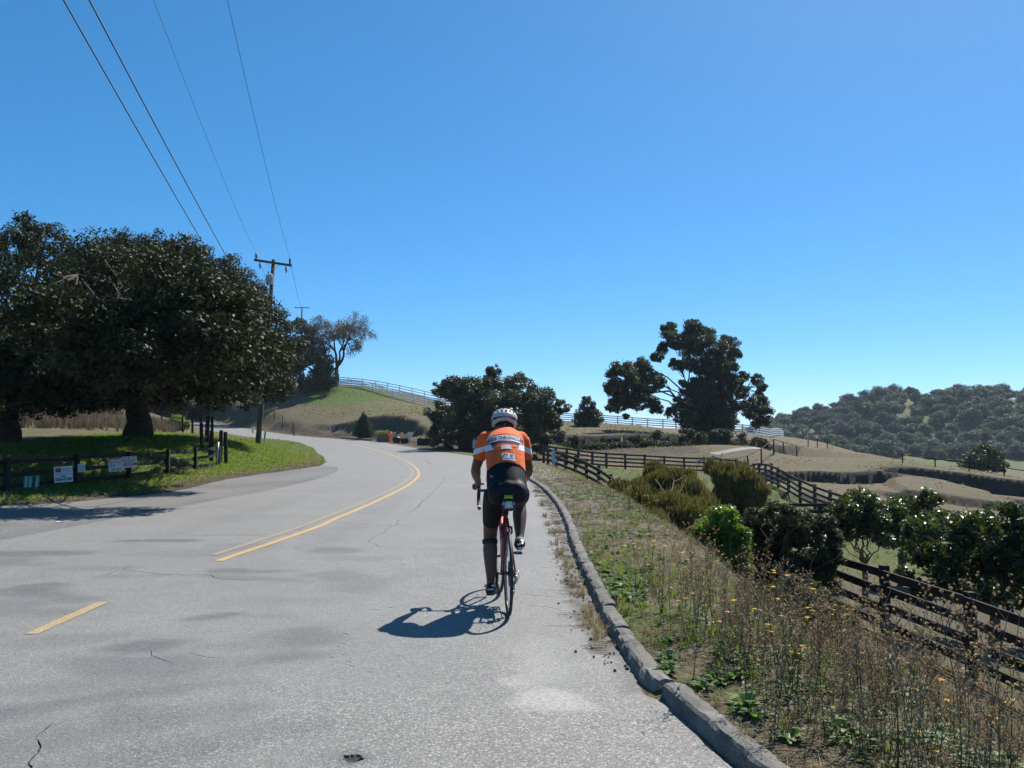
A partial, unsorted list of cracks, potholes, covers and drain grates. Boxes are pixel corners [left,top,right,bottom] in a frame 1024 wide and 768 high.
crack [27,724,51,768]
pothole [343,754,365,763]
